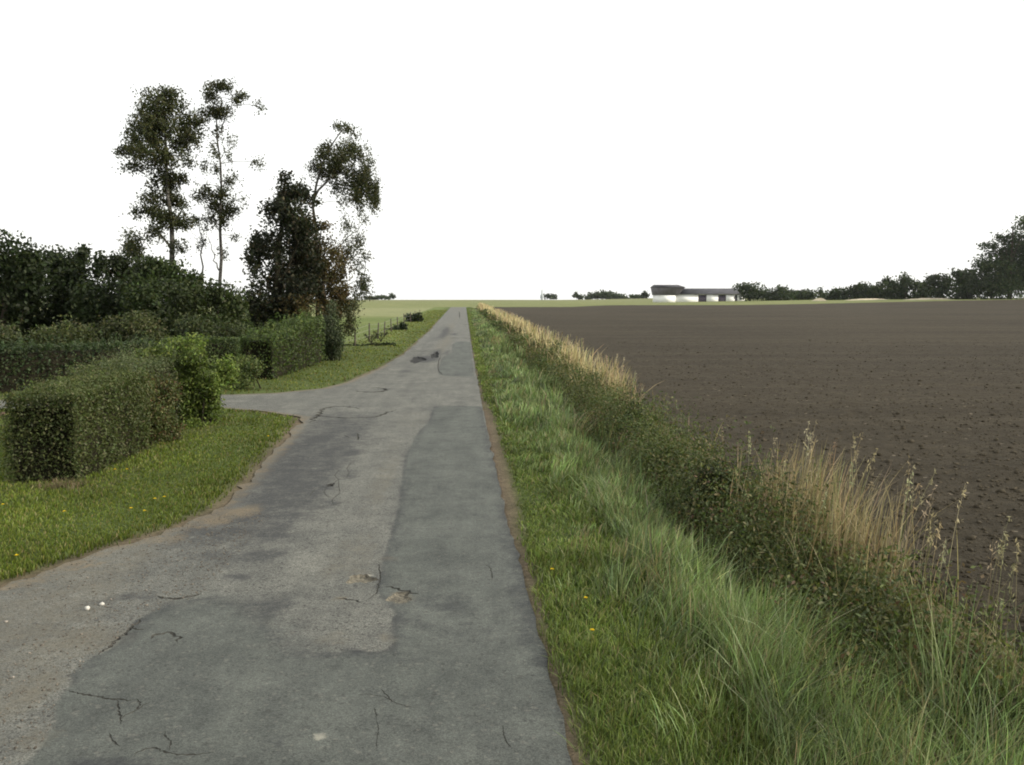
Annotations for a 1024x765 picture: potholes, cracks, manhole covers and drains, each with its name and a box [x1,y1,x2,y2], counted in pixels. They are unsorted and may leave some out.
crack [309,388,395,440]
pothole [345,574,379,584]
crack [69,690,211,756]
pothole [386,592,412,603]
crack [360,690,408,747]
crack [311,461,353,507]
crack [98,618,184,655]
